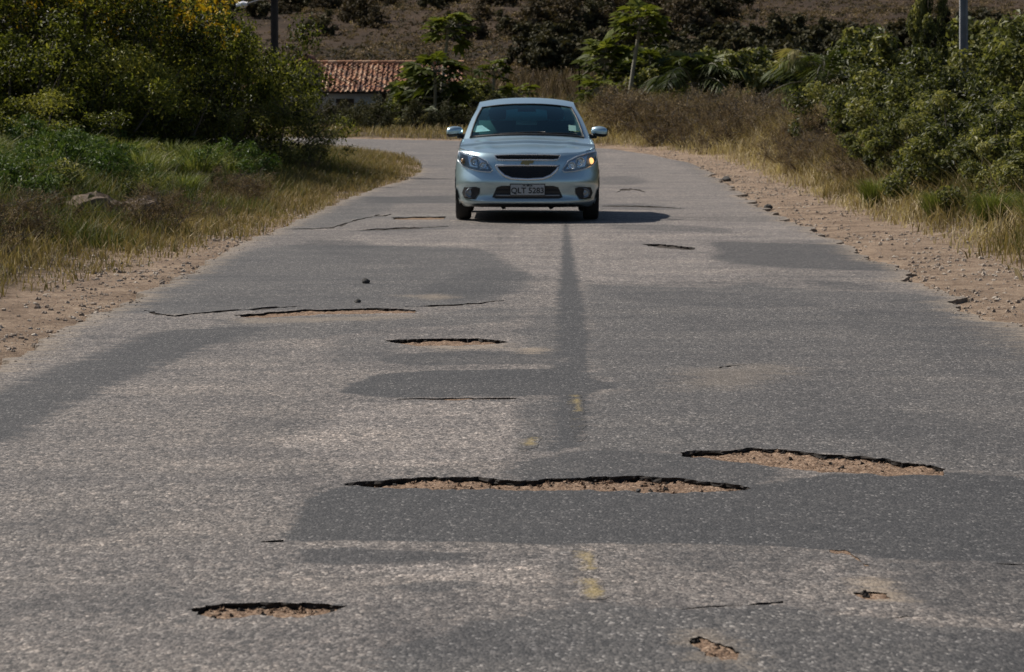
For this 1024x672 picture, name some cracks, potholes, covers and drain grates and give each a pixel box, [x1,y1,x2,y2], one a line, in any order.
pothole [386,338,507,346]
pothole [235,308,417,318]
pothole [344,475,750,494]
crack [303,214,449,230]
pothole [189,602,346,619]
pothole [680,448,945,476]
pothole [853,590,890,600]
crack [682,601,783,610]
pothole [689,636,739,660]
crack [143,306,297,317]
